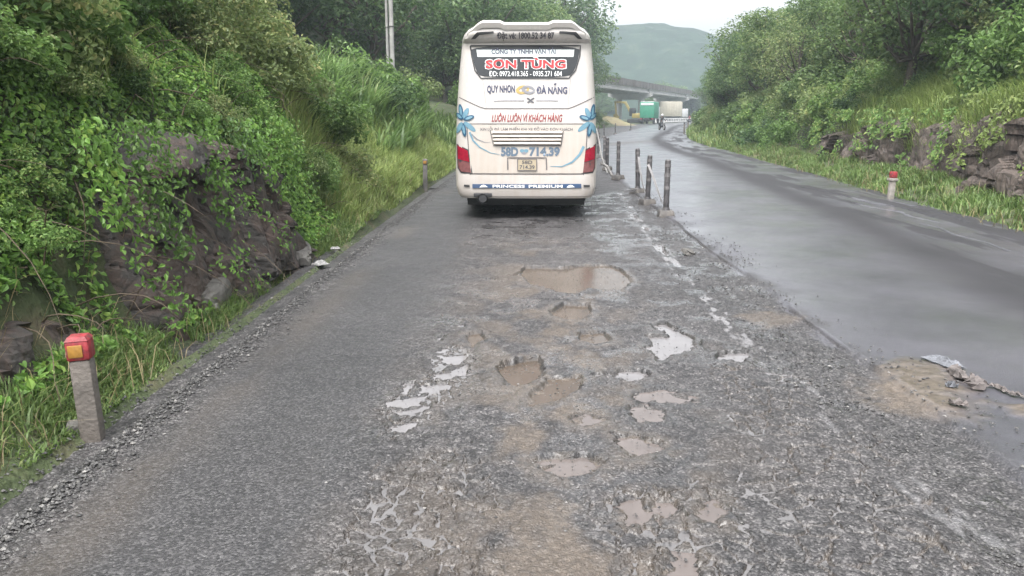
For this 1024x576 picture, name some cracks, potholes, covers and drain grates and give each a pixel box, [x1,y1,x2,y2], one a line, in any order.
pothole [623,386,706,425]
pothole [521,451,610,482]
pothole [461,329,489,349]
pothole [519,263,636,295]
pothole [598,495,688,534]
crack [313,343,521,576]
pothole [494,354,547,388]
pothole [608,430,673,463]
pothole [575,330,618,346]
pothole [380,322,473,437]
pothole [509,374,586,412]
pothole [547,301,594,321]
